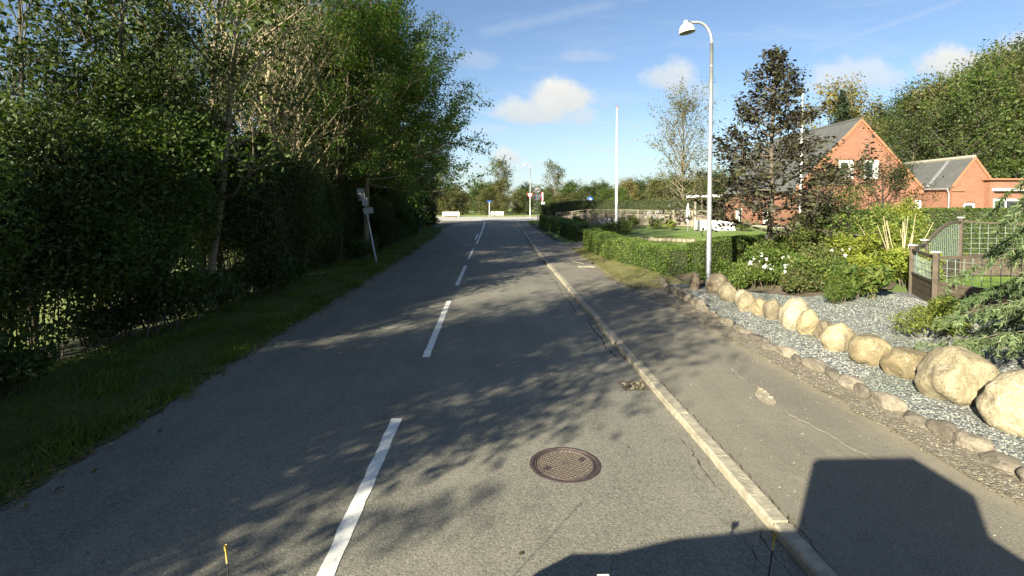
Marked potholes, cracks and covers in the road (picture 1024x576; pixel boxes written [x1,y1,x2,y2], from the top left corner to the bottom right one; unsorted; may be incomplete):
manhole cover [530,447,602,483]
crack [547,270,617,358]
crack [663,383,872,574]
